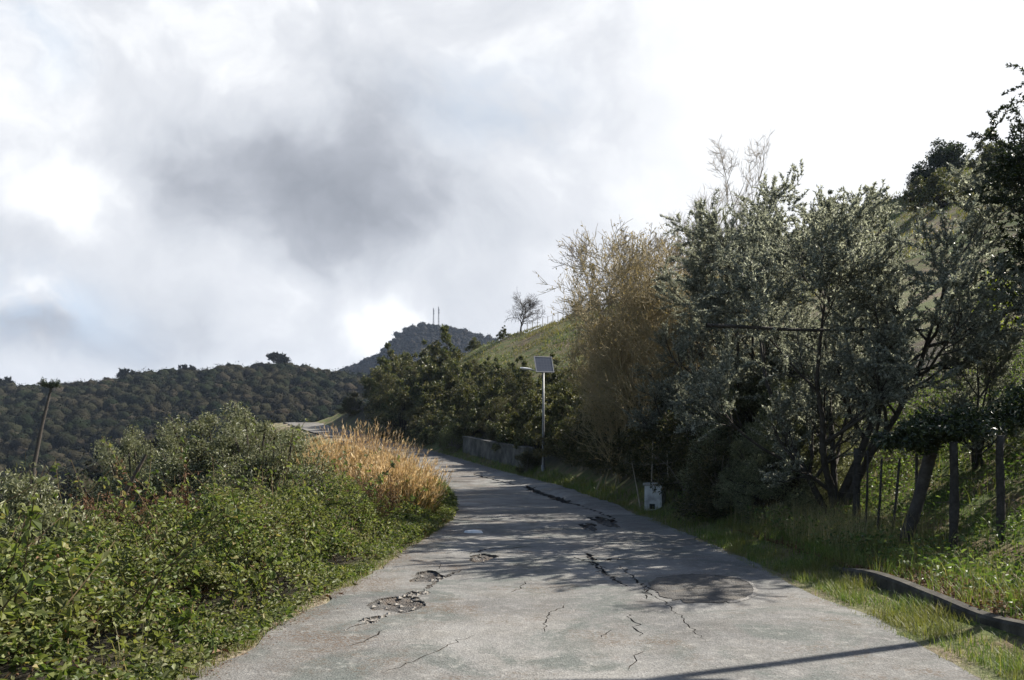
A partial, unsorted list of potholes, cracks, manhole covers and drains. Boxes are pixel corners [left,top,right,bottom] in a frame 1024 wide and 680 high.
crack [378,634,475,674]
pothole [468,547,519,563]
crack [562,553,702,670]
pothole [344,590,429,631]
pothole [409,564,461,594]
